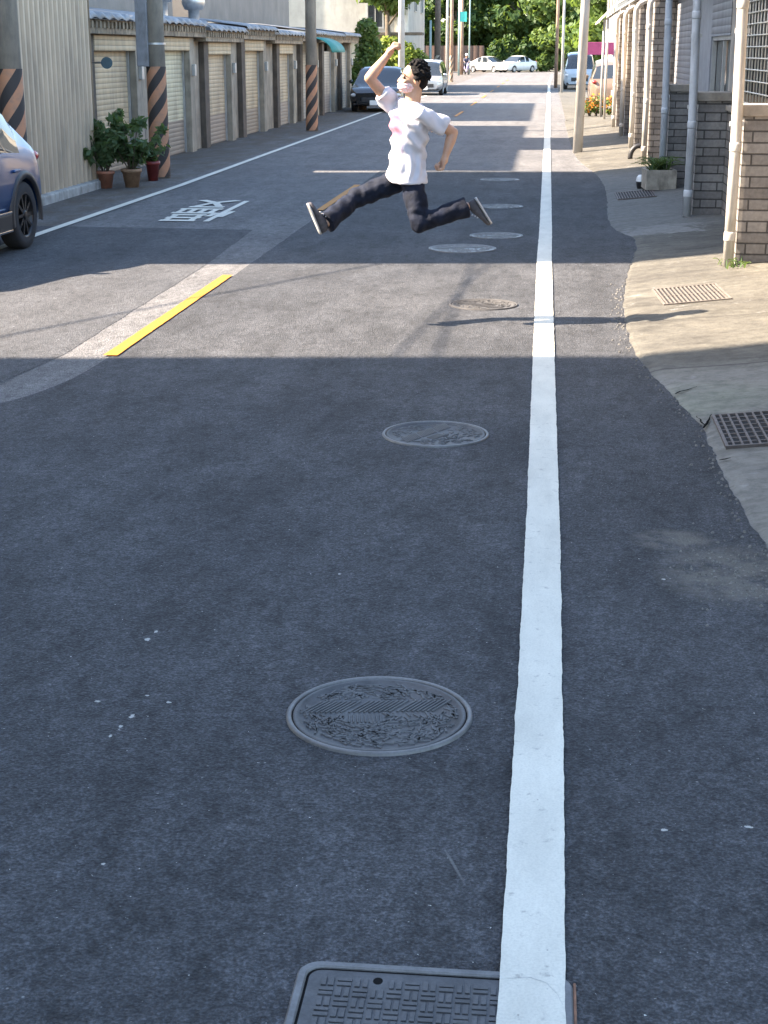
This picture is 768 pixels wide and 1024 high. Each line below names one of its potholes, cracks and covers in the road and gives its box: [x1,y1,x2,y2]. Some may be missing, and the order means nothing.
manhole cover [284,961,577,1024]
manhole cover [382,421,489,448]
drain grate [652,283,732,305]
drain grate [712,410,768,450]
manhole cover [286,676,473,757]
manhole cover [449,298,518,311]
drain grate [615,190,657,200]
manhole cover [428,244,497,253]
